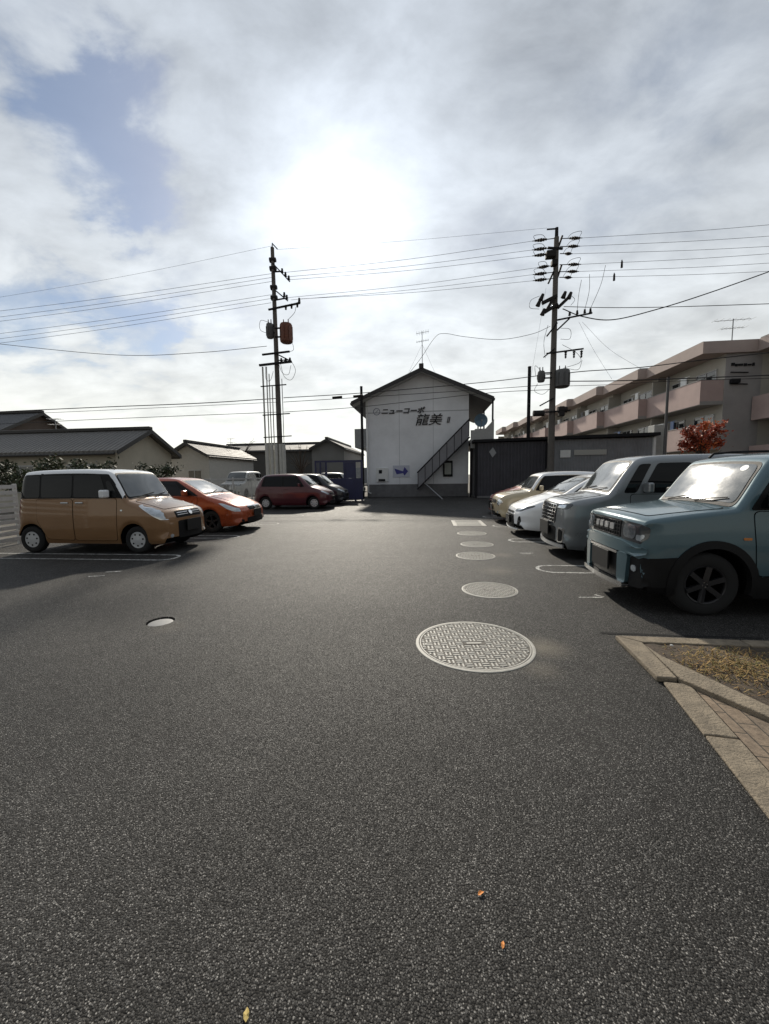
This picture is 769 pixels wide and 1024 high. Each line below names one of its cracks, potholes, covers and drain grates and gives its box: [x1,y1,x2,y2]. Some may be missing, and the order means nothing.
manhole cover [416,622,536,673]
manhole cover [456,552,495,560]
manhole cover [462,582,518,598]
